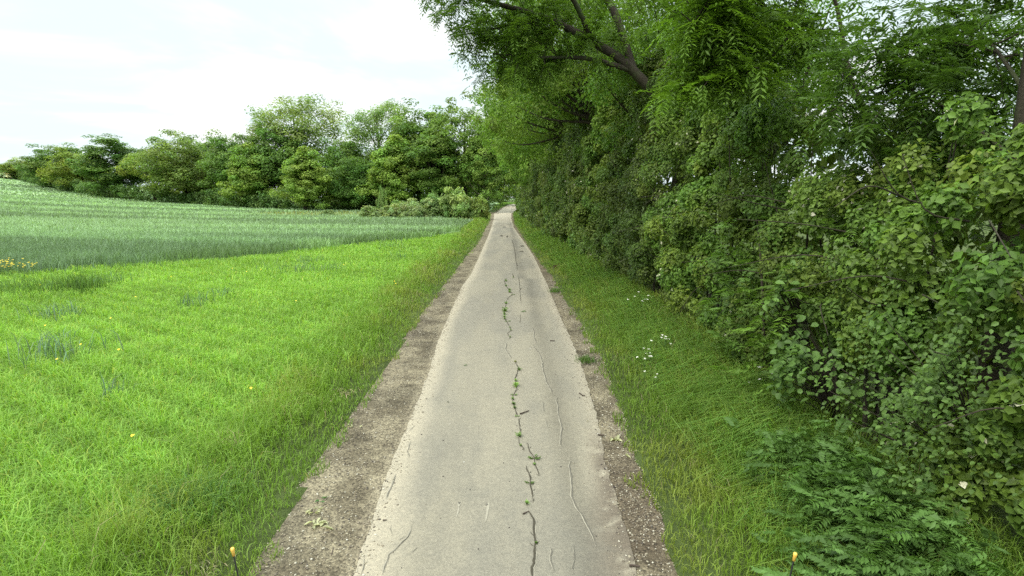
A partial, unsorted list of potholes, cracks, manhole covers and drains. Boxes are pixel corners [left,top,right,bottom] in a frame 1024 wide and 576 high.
crack [504,240,563,576]
crack [382,524,417,575]
crack [568,462,596,570]
